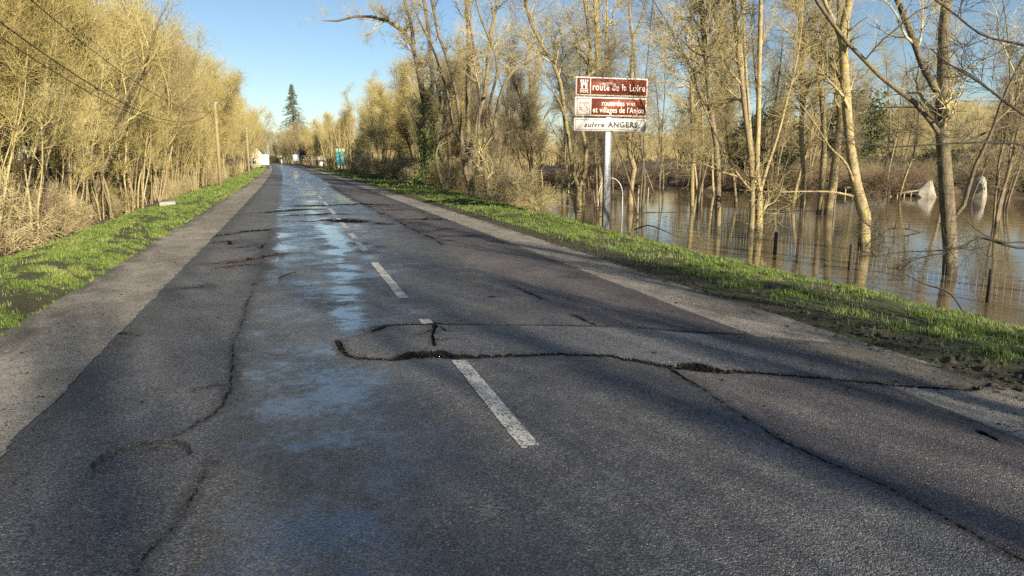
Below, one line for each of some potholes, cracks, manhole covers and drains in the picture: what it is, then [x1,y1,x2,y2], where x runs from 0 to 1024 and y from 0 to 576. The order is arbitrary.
crack [335,322,1024,561]
crack [137,470,206,572]
crack [212,186,451,268]
